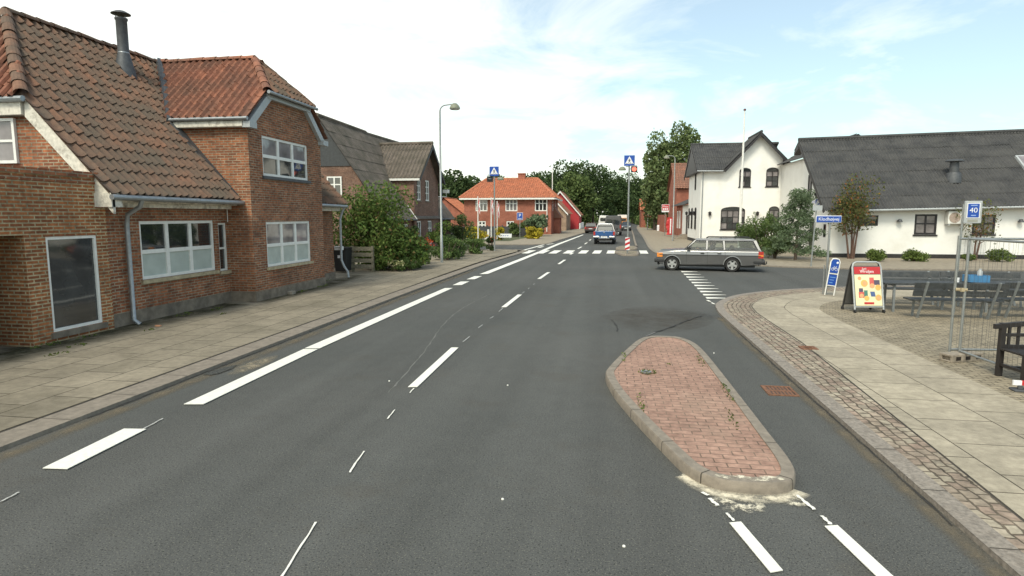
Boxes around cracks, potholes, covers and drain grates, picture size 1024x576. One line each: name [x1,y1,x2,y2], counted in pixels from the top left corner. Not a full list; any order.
drain grate [760,385,800,397]
